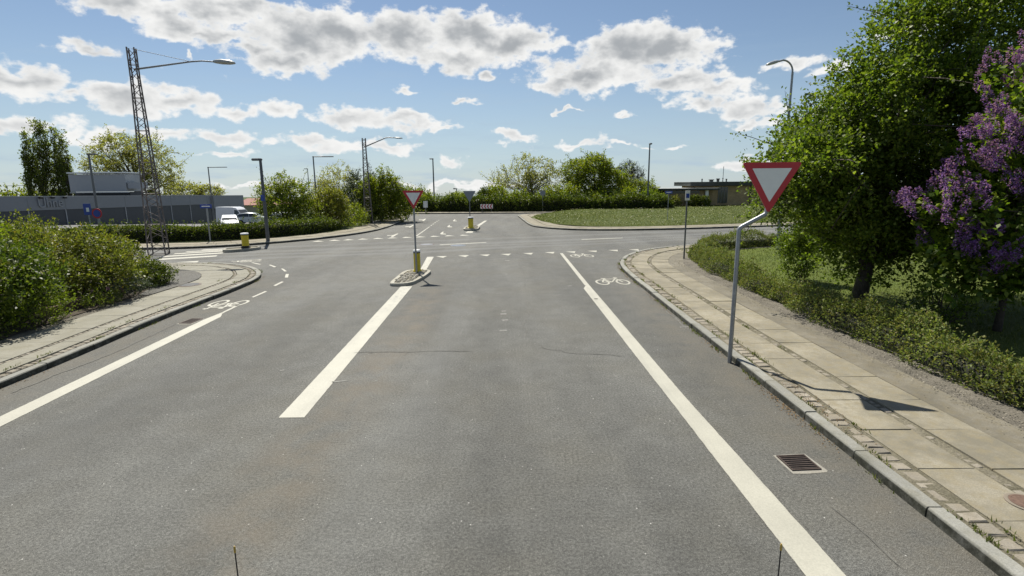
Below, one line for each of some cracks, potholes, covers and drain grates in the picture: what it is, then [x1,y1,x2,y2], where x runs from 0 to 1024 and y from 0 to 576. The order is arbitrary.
manhole cover [1003,493,1024,510]
drain grate [773,454,828,474]
